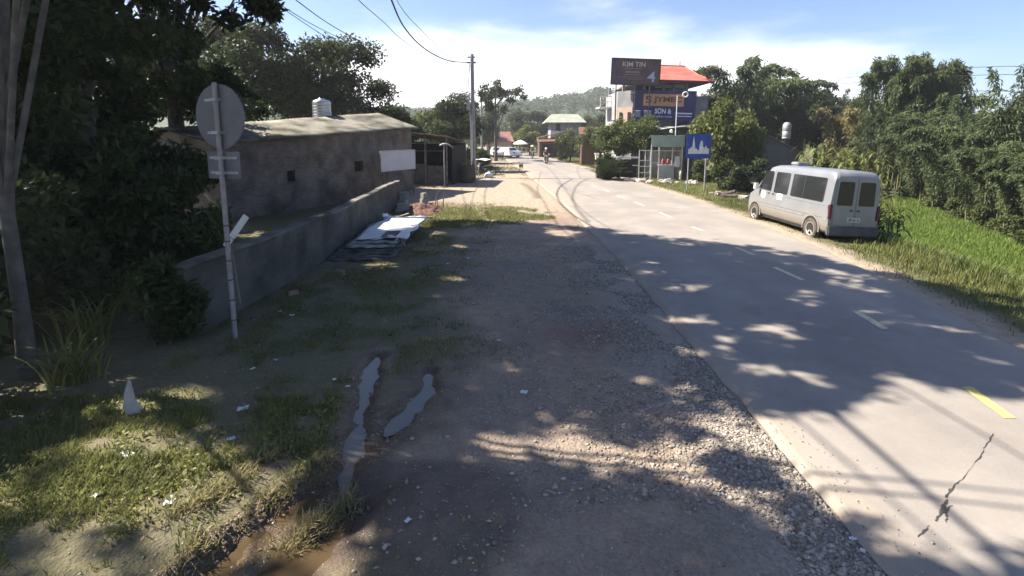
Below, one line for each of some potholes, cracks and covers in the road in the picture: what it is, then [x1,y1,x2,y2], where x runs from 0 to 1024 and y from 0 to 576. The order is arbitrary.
crack [917,433,993,537]
